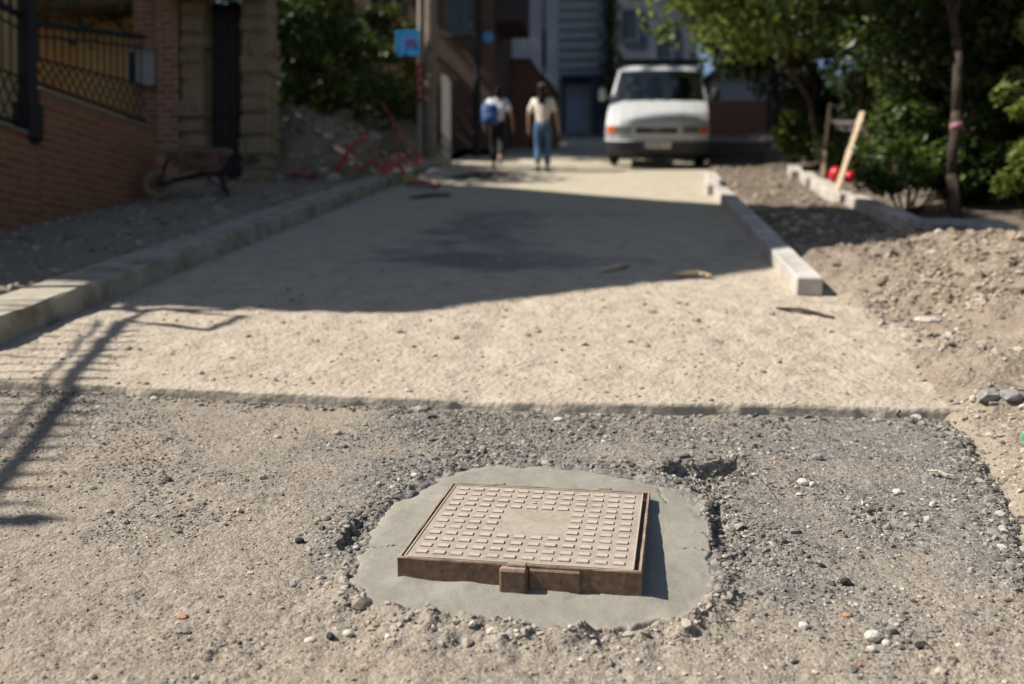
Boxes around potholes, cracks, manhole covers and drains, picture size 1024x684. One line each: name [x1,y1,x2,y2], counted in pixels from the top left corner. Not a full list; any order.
pothole [331,516,374,552]
manhole cover [397,482,650,596]
pothole [655,457,745,495]
